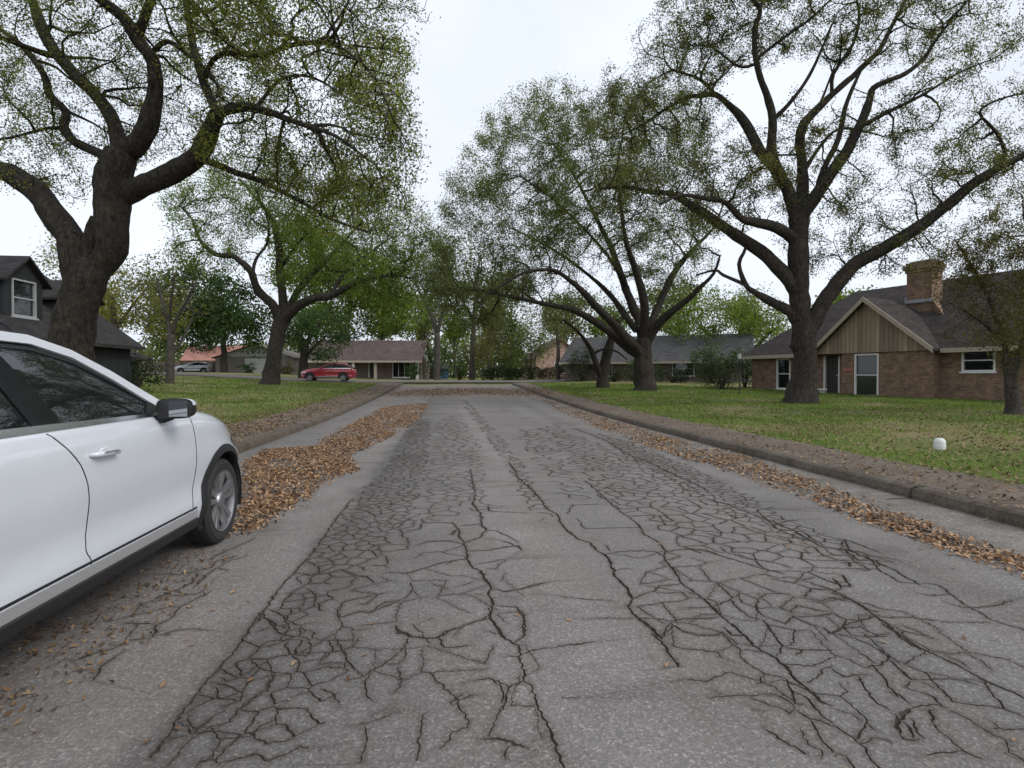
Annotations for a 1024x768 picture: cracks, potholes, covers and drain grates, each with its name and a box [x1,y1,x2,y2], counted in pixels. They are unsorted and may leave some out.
crack [75,400,1024,768]
